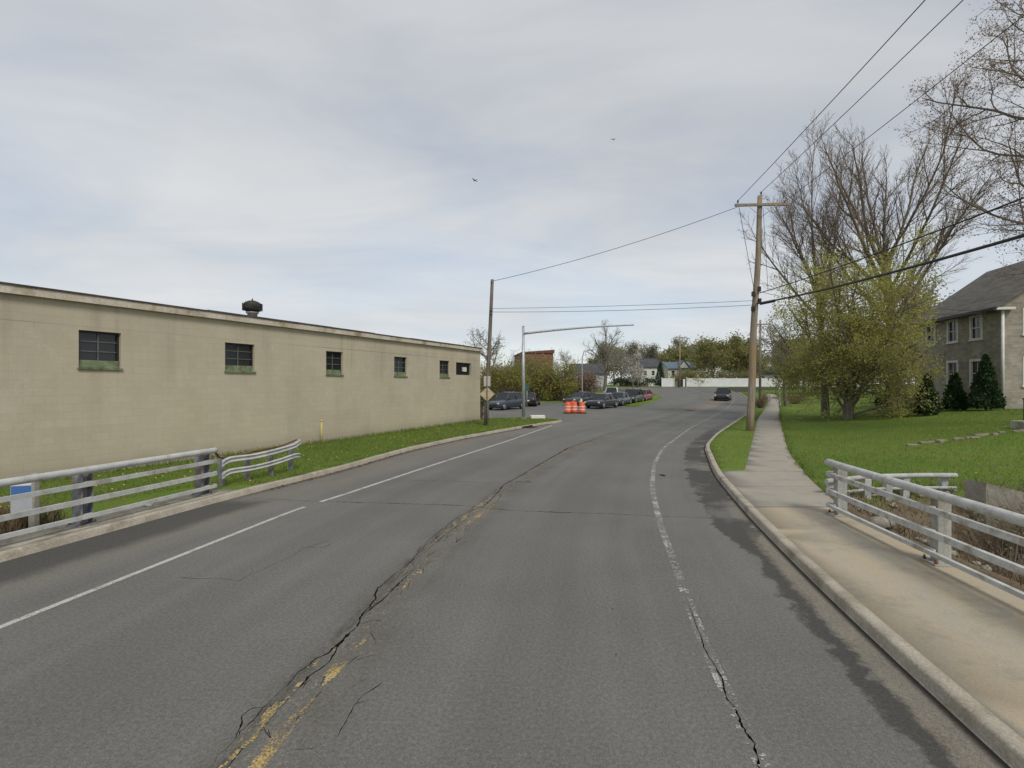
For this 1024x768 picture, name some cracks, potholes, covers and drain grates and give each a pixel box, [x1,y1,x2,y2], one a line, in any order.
crack [213,437,699,768]
crack [688,605,760,768]
